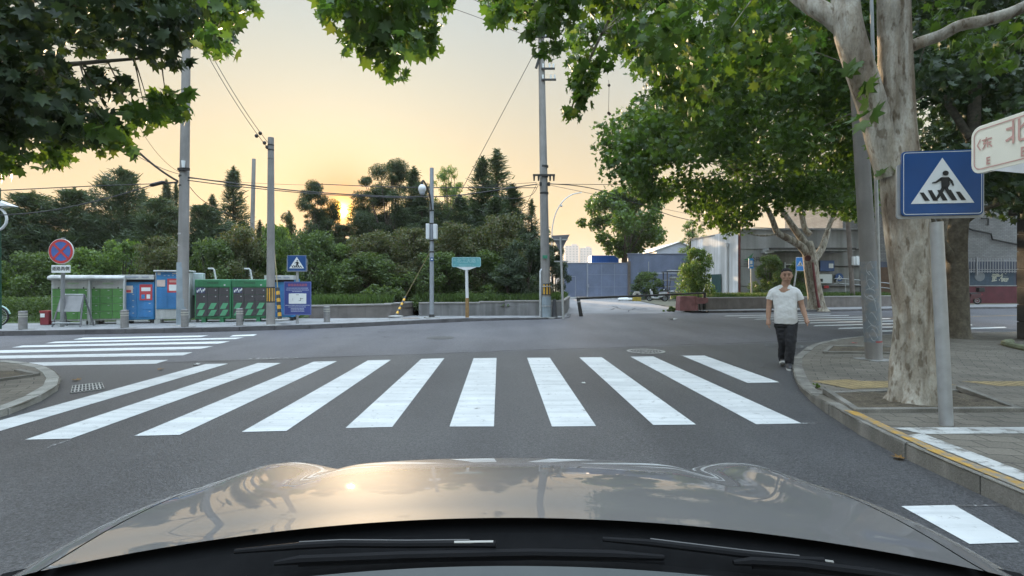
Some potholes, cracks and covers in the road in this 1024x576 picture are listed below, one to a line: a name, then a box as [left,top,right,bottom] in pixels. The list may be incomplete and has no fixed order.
drain grate [70,382,105,394]
